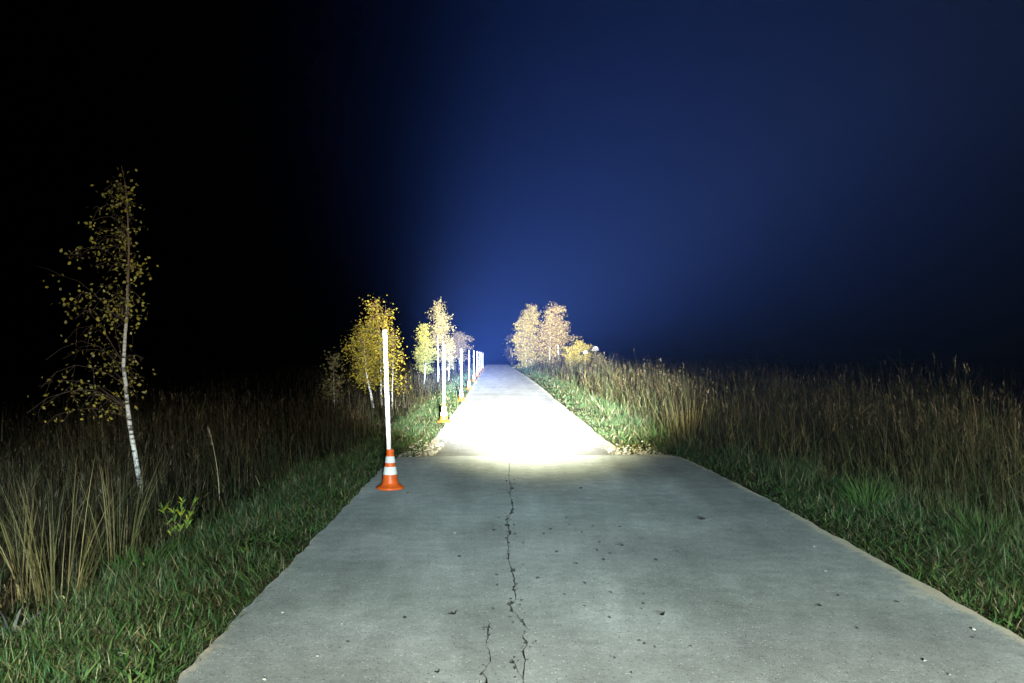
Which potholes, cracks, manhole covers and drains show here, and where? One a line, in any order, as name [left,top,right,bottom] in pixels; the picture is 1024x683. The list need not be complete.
crack [479,463,537,683]
